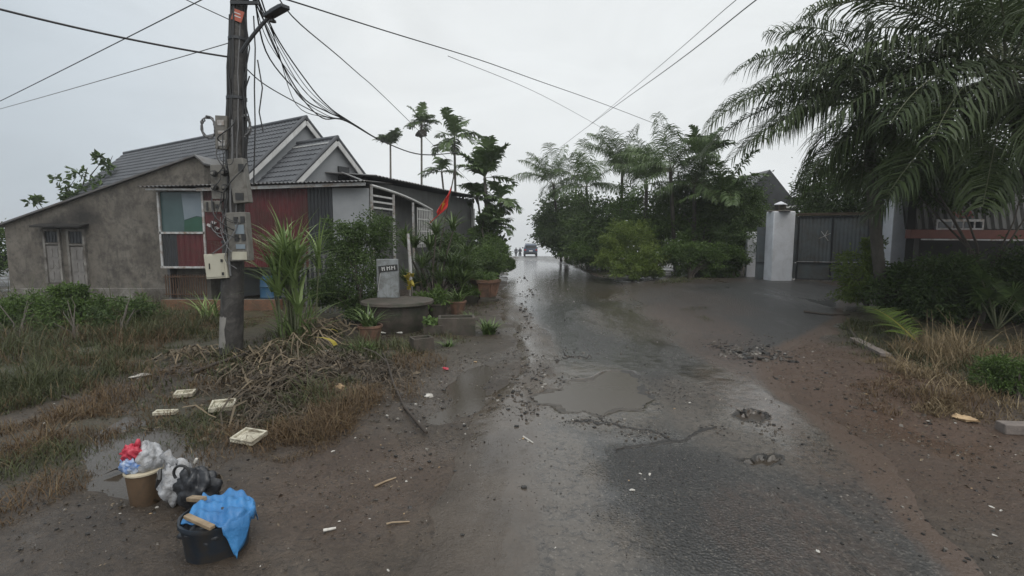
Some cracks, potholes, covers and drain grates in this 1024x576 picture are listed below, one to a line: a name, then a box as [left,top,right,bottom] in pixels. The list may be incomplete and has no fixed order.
crack [574,414,717,450]
pothole [525,368,661,418]
pothole [735,453,785,468]
pothole [732,408,770,425]
